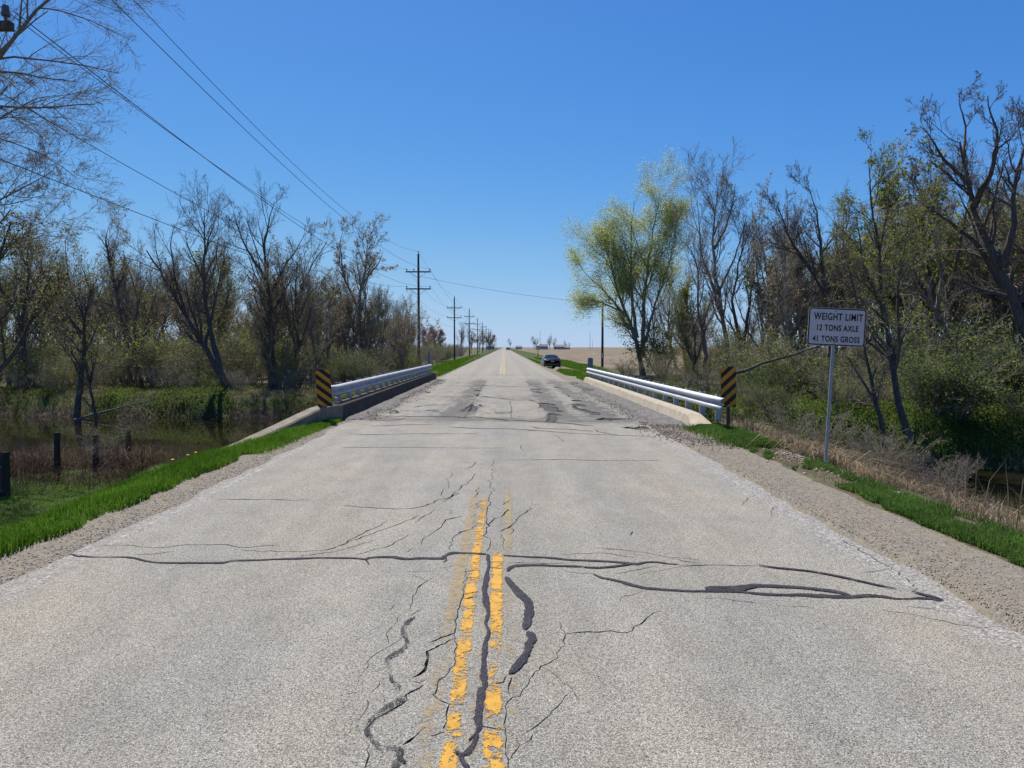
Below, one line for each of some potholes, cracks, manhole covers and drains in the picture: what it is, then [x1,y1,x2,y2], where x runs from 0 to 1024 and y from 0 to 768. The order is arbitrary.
crack [345,382,648,461]
crack [107,461,737,768]
